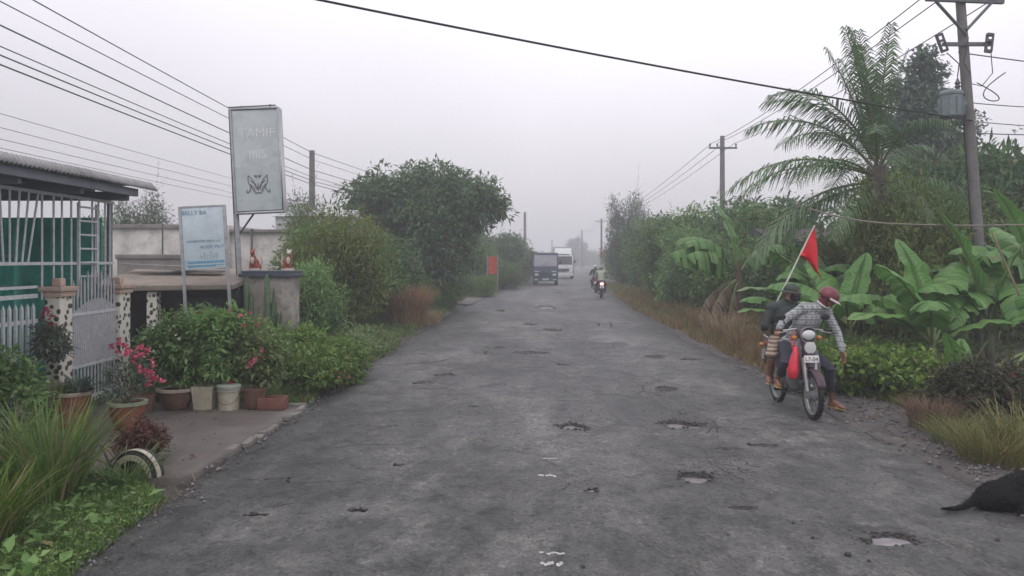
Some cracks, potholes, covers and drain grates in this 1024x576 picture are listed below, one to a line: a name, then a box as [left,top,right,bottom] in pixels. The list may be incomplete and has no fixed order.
pothole [655,418,708,429]
pothole [677,470,715,483]
pothole [553,421,592,431]
pothole [855,530,922,546]
